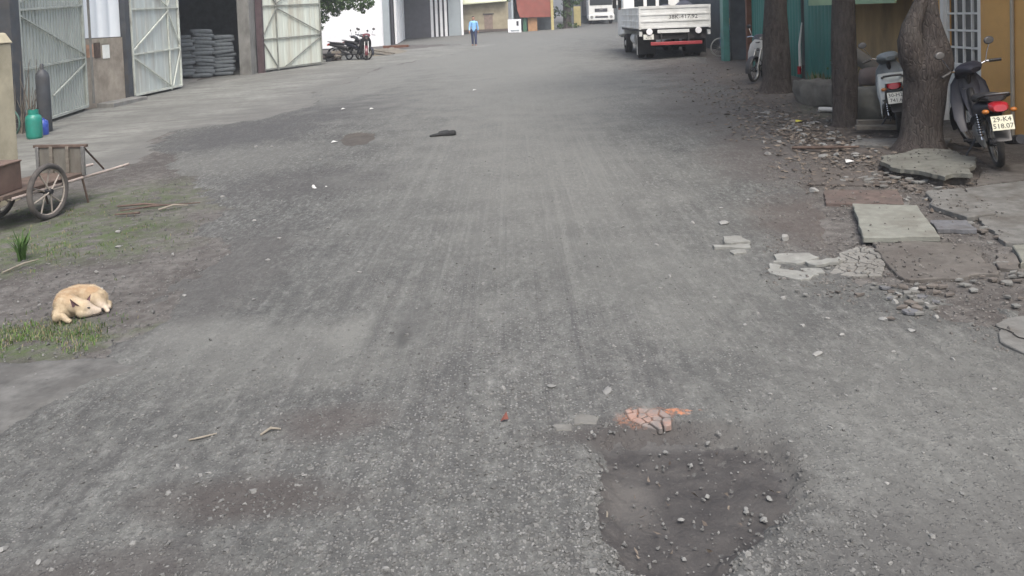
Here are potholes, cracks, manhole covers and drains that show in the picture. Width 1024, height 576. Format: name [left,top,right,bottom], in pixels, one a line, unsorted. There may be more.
pothole [597,438,798,576]
